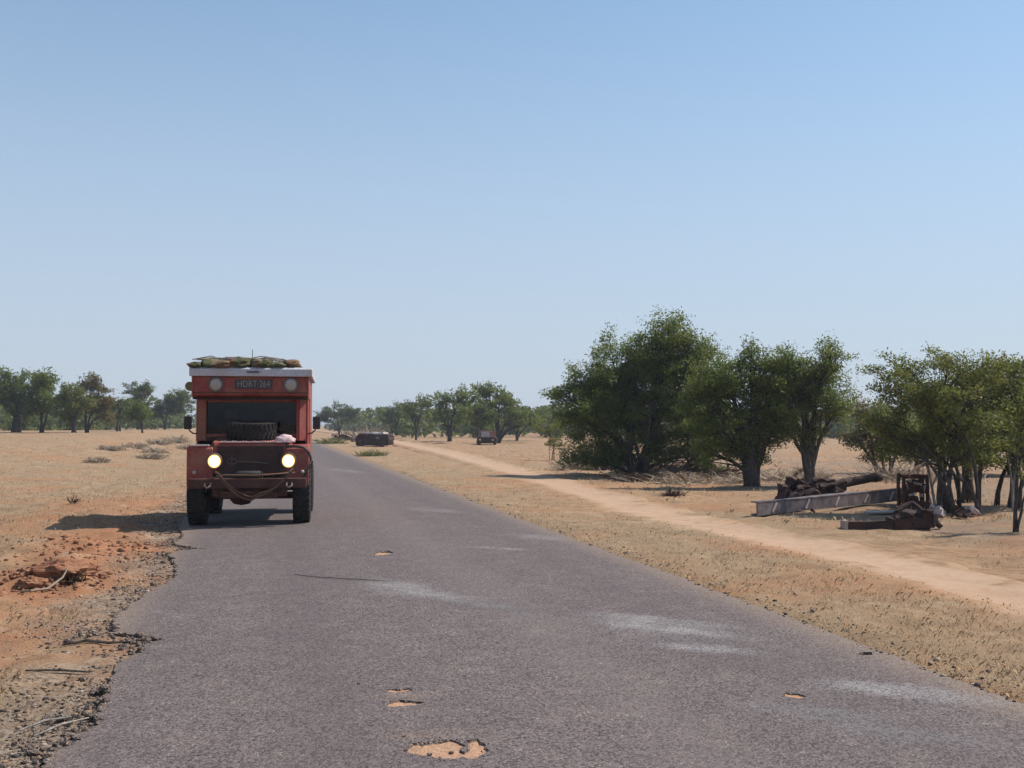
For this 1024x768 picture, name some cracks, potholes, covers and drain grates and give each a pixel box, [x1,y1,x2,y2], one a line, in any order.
pothole [405,738,489,759]
